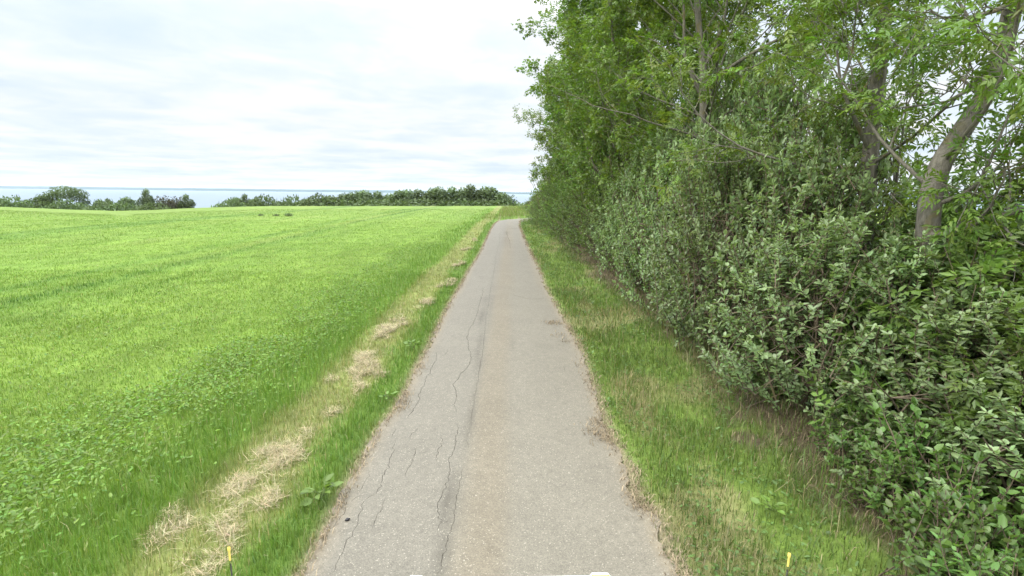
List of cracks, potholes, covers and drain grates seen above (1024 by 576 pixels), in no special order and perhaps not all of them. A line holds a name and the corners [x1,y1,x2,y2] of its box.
crack [330,349,448,569]
crack [436,290,483,532]
